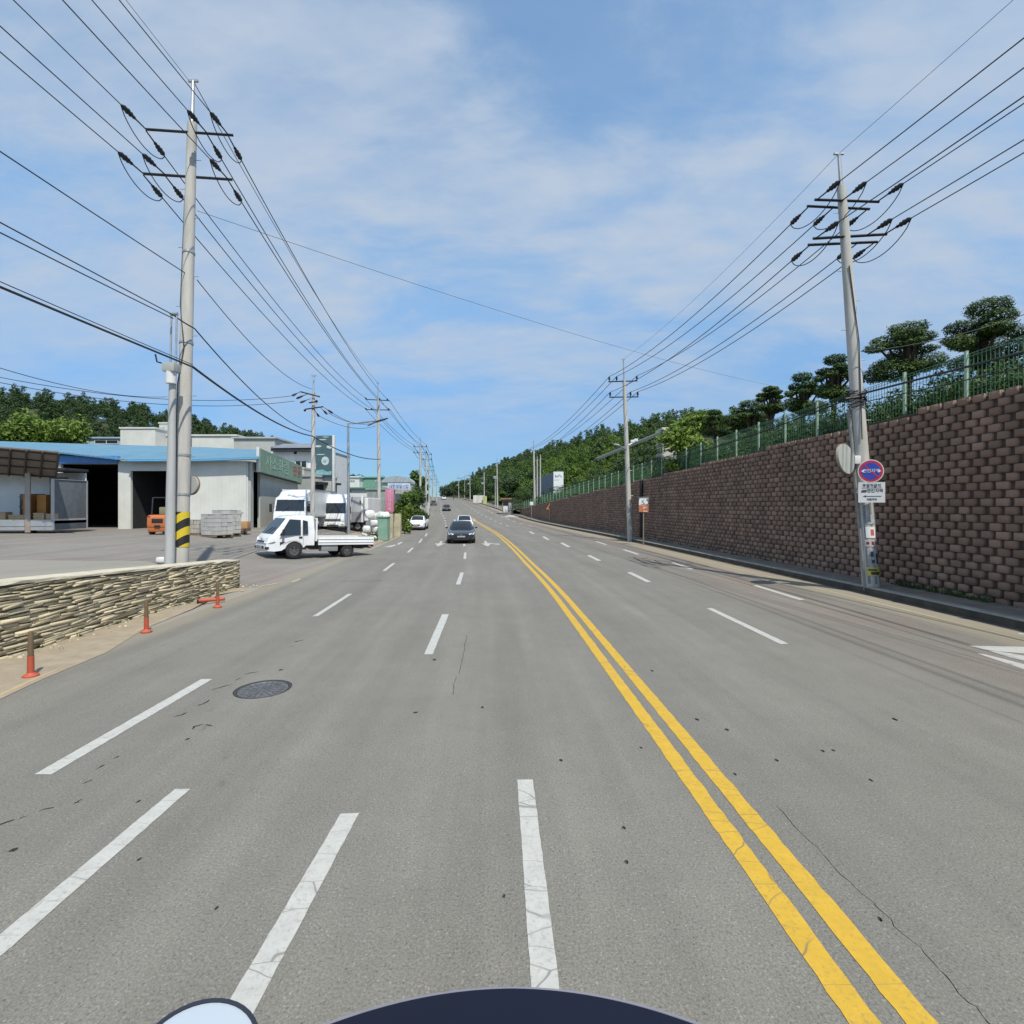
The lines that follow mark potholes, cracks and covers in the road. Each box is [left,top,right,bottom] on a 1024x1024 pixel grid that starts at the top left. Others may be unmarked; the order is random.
manhole cover [233,680,292,699]
crack [780,809,990,1024]
